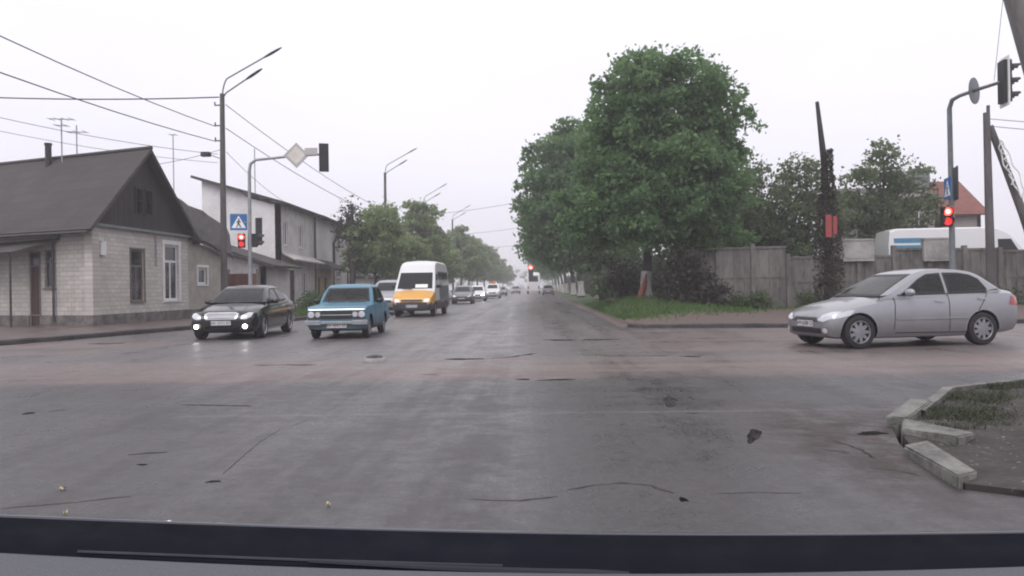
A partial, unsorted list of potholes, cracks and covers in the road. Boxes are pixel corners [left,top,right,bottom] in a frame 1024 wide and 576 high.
manhole cover [363,355,386,363]
pothole [747,429,762,444]
pothole [663,397,677,408]
crack [1,496,133,509]
crack [819,441,921,476]
crack [222,421,305,475]
crack [466,482,674,502]
